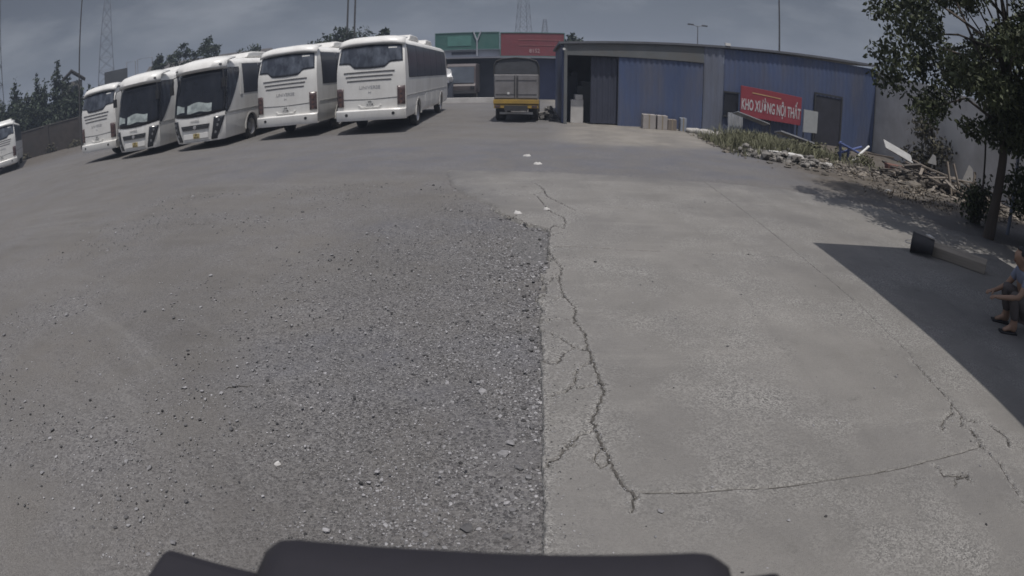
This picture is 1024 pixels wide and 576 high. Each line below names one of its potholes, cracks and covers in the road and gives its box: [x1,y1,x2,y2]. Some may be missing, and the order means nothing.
crack [912,362,1023,503]
crack [540,250,637,512]
crack [509,184,568,236]
